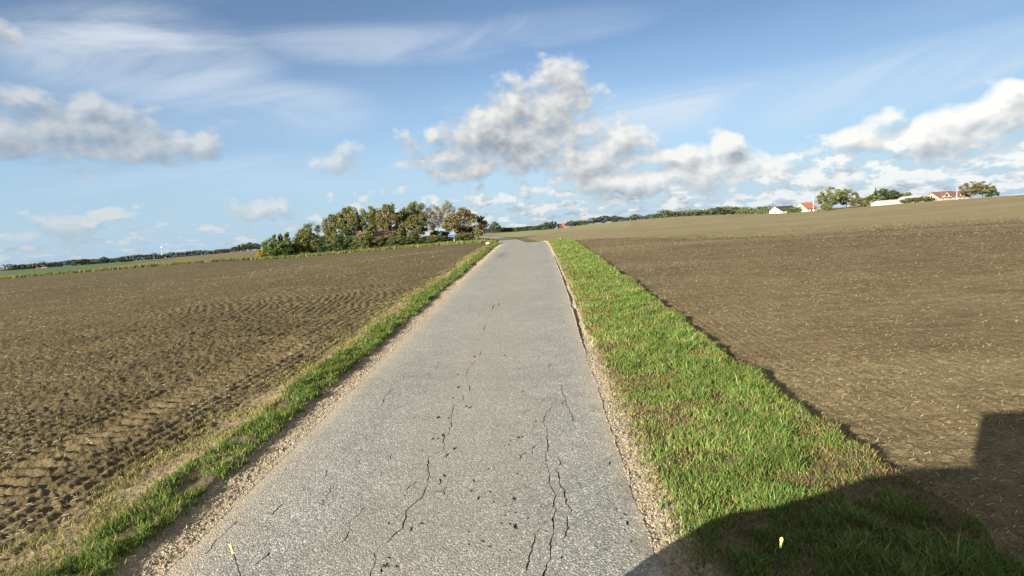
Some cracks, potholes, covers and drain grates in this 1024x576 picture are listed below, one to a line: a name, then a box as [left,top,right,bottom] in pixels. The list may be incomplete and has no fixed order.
crack [518,364,582,576]
crack [370,353,481,576]
